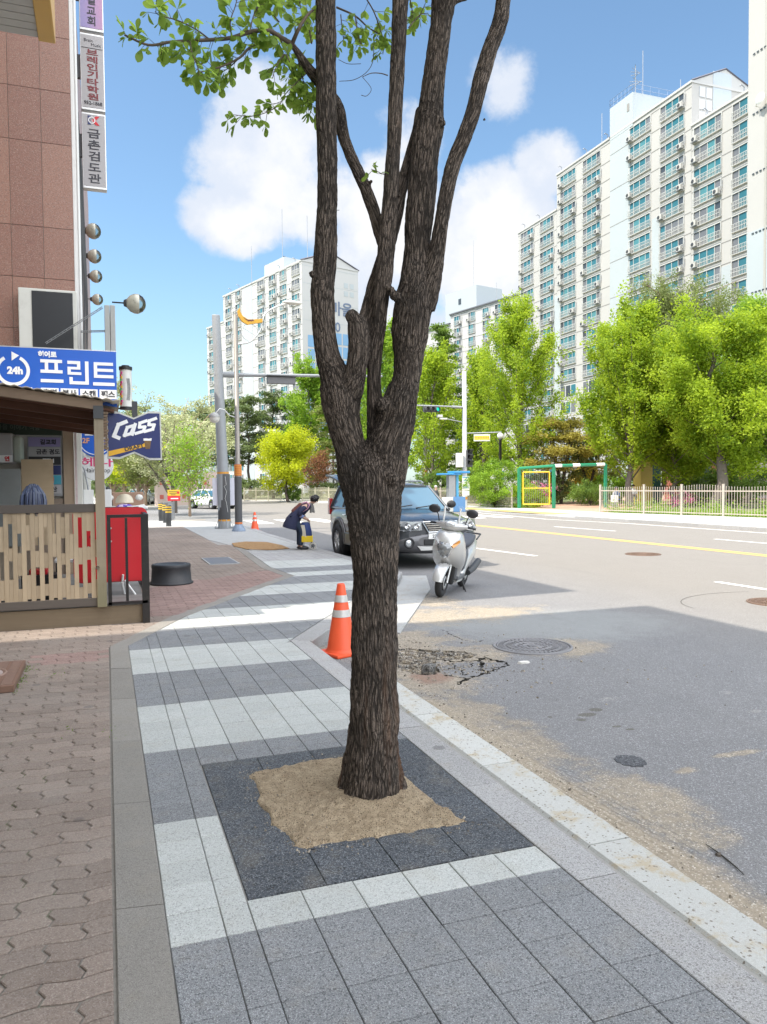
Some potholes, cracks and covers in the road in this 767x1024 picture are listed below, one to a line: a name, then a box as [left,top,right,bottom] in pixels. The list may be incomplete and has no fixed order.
manhole cover [746,597,767,606]
pothole [397,648,477,675]
manhole cover [493,637,573,655]
manhole cover [0,660,26,693]
manhole cover [201,557,240,565]
